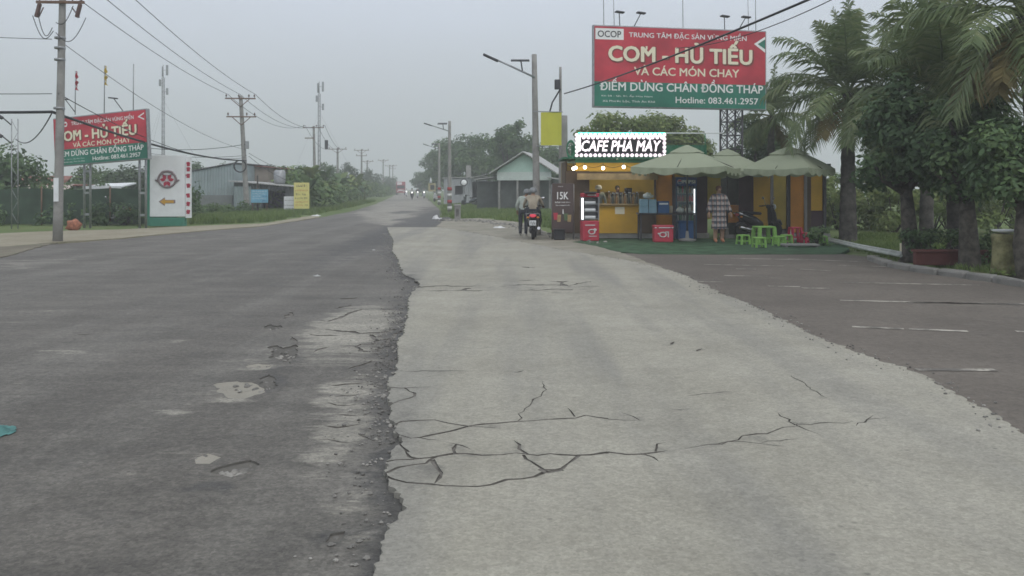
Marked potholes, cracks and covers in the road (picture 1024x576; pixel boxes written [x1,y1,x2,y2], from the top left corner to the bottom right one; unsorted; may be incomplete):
crack [685,413,879,449]
crack [507,267,600,291]
crack [290,298,665,487]
pothole [213,381,265,399]
pothole [195,453,221,464]
